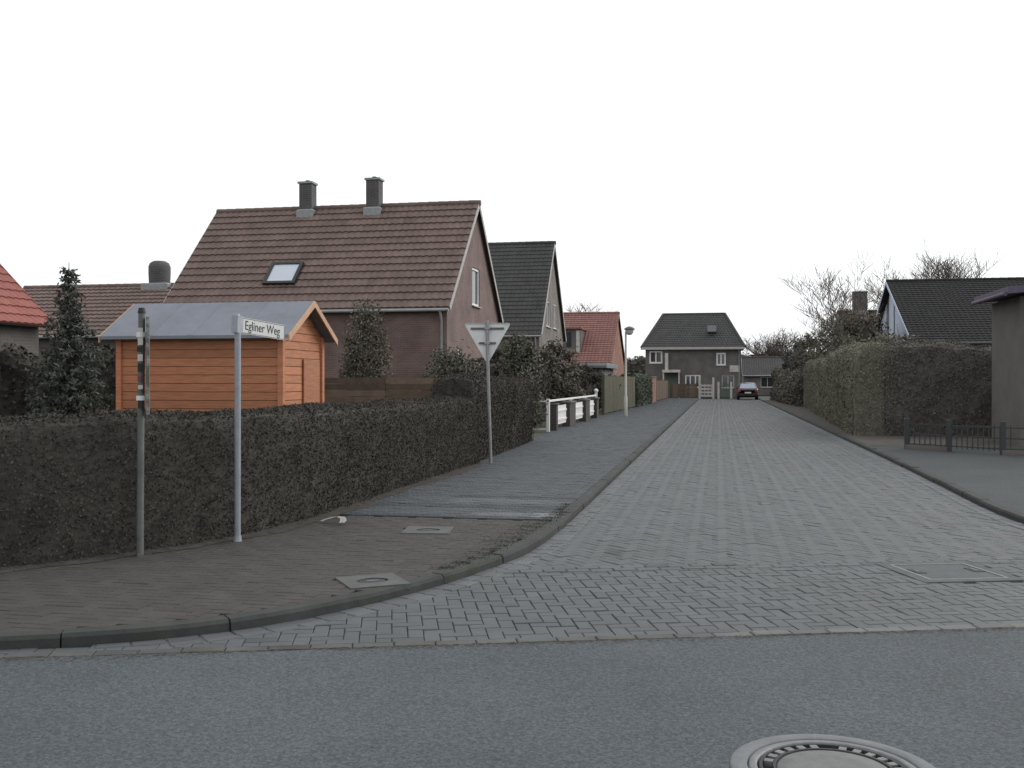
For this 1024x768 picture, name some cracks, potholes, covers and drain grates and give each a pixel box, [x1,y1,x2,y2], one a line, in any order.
utility cover [401,526,454,535]
manhole cover [875,561,1024,584]
manhole cover [729,734,935,768]
utility cover [335,573,411,590]
